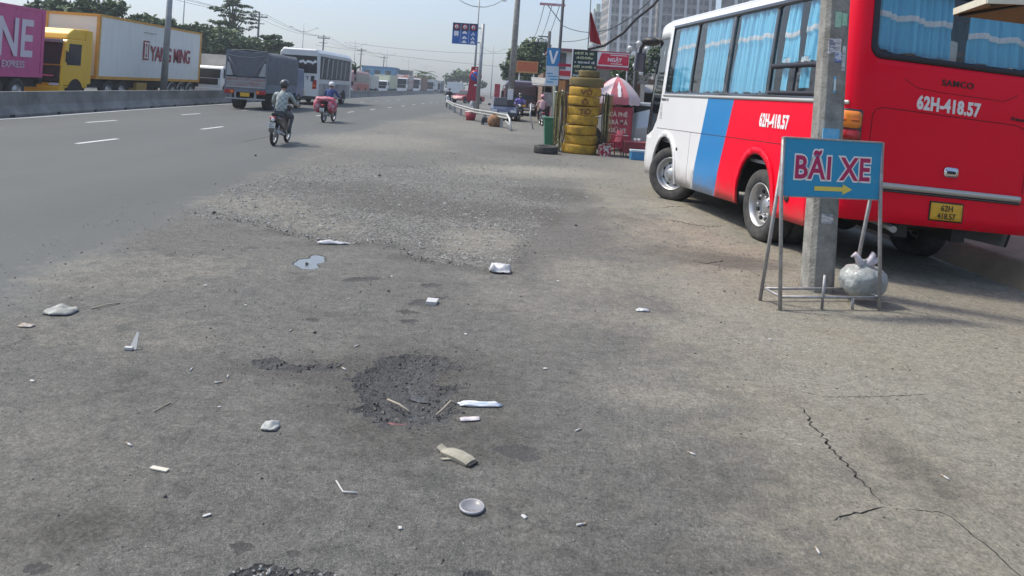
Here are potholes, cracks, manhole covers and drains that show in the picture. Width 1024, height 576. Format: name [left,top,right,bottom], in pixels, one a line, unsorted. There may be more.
pothole [250,357,349,373]
pothole [228,563,337,576]
crack [775,386,1020,576]
pothole [345,353,469,429]
